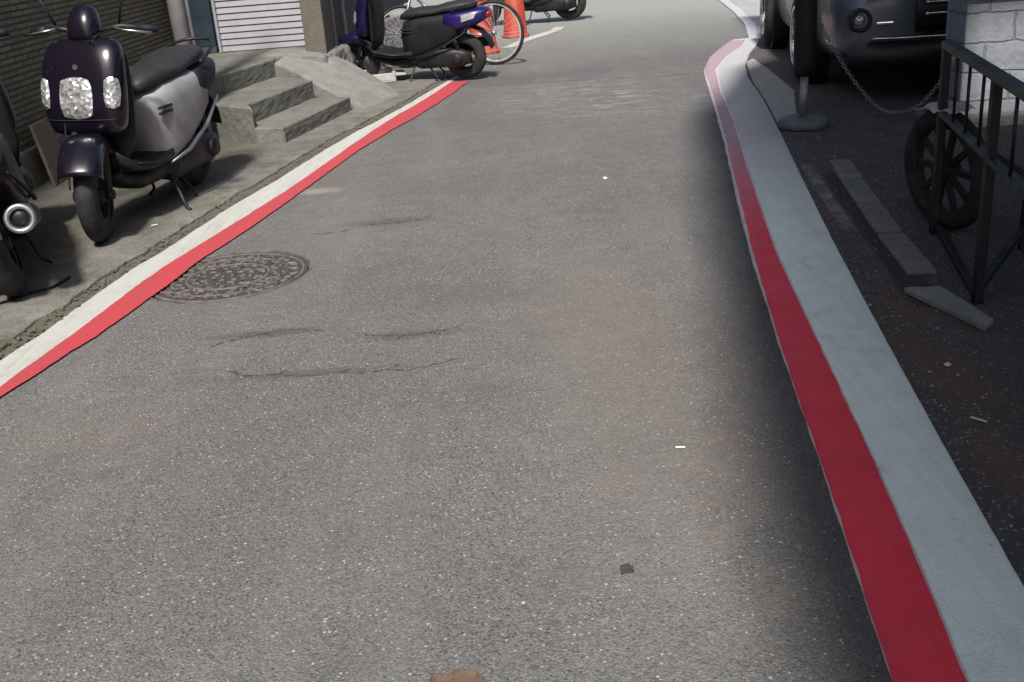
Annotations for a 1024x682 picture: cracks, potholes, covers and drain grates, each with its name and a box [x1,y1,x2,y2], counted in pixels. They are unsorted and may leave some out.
crack [187,358,462,377]
crack [209,321,467,349]
pothole [619,563,634,575]
crack [314,215,430,234]
manhole cover [148,250,313,304]
